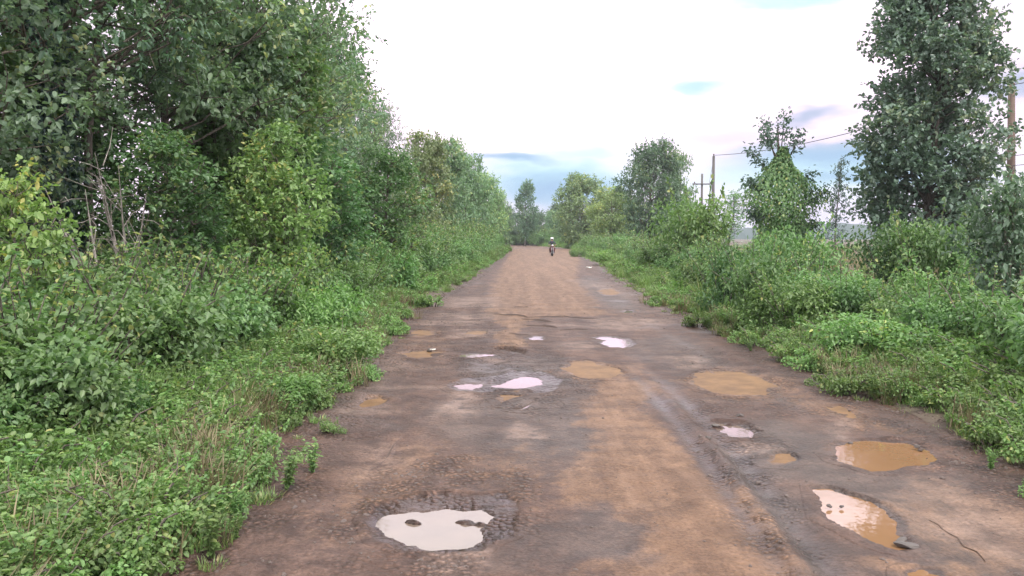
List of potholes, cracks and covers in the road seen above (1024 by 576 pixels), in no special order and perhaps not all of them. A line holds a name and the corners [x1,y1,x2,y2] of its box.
pothole [674,367,798,399]
pothole [351,488,530,560]
pothole [578,334,650,350]
pothole [548,358,639,381]
pothole [385,348,461,360]
pothole [813,435,960,476]
pothole [799,481,931,558]
